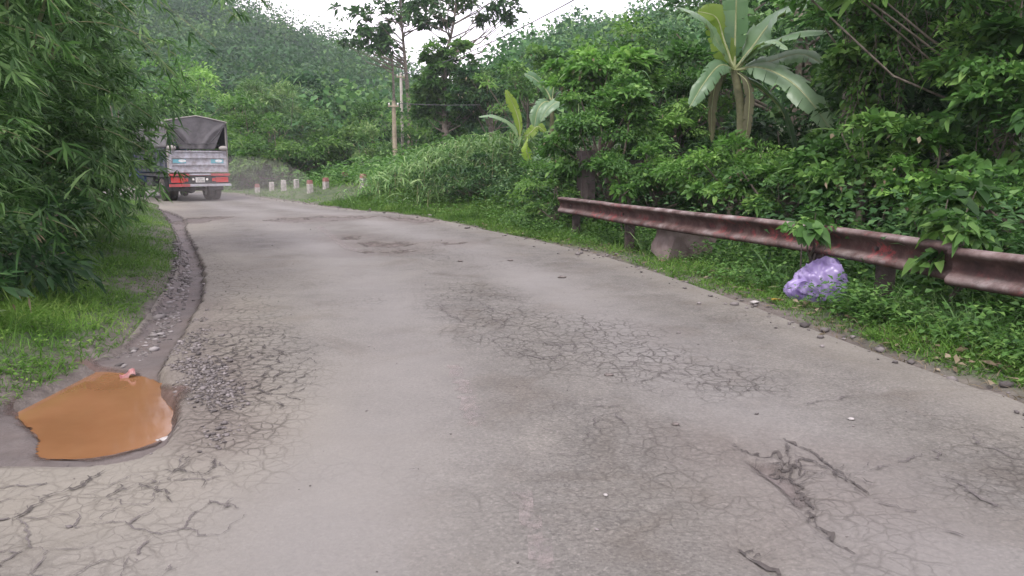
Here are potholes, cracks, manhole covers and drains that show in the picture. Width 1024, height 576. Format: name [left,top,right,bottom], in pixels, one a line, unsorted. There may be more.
pothole [10,359,188,461]
crack [528,398,626,454]
crack [738,549,781,576]
crack [734,438,999,553]
crack [430,303,792,398]
crack [0,450,247,576]
